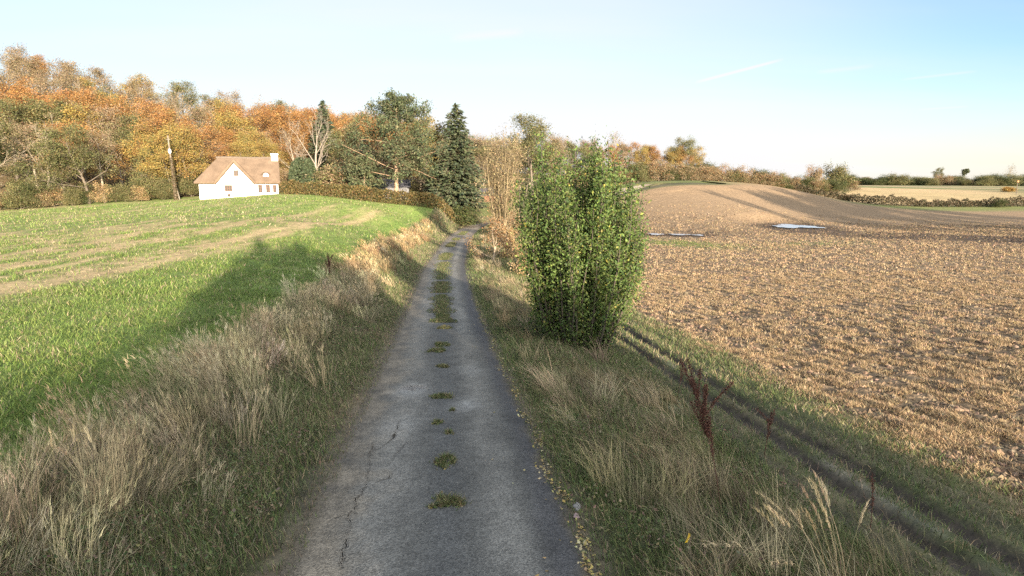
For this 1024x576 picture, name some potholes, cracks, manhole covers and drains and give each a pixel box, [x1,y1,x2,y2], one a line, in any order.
crack [331,419,408,568]
